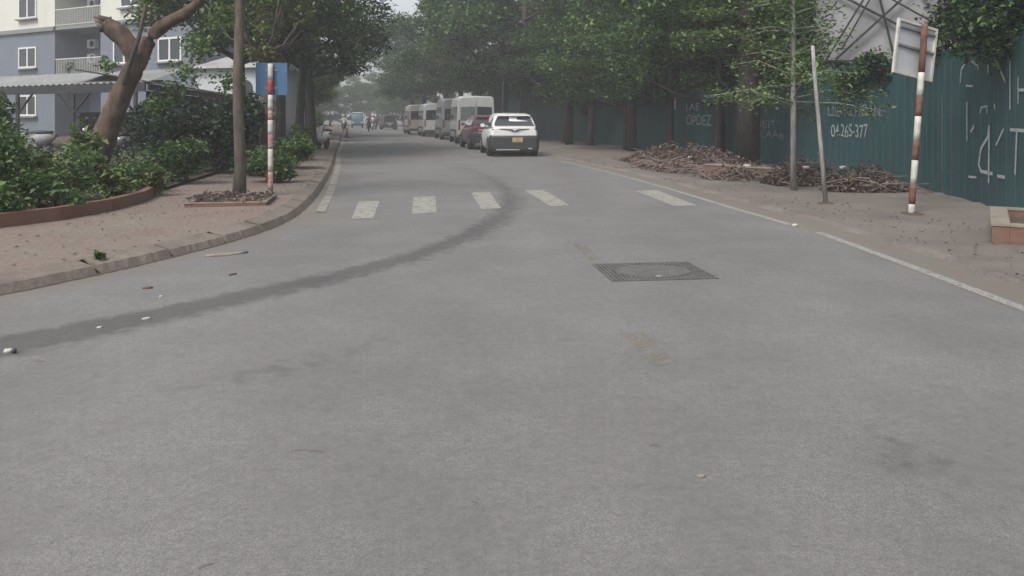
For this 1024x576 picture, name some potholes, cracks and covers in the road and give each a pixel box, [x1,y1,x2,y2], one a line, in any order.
manhole cover [592,261,719,282]
